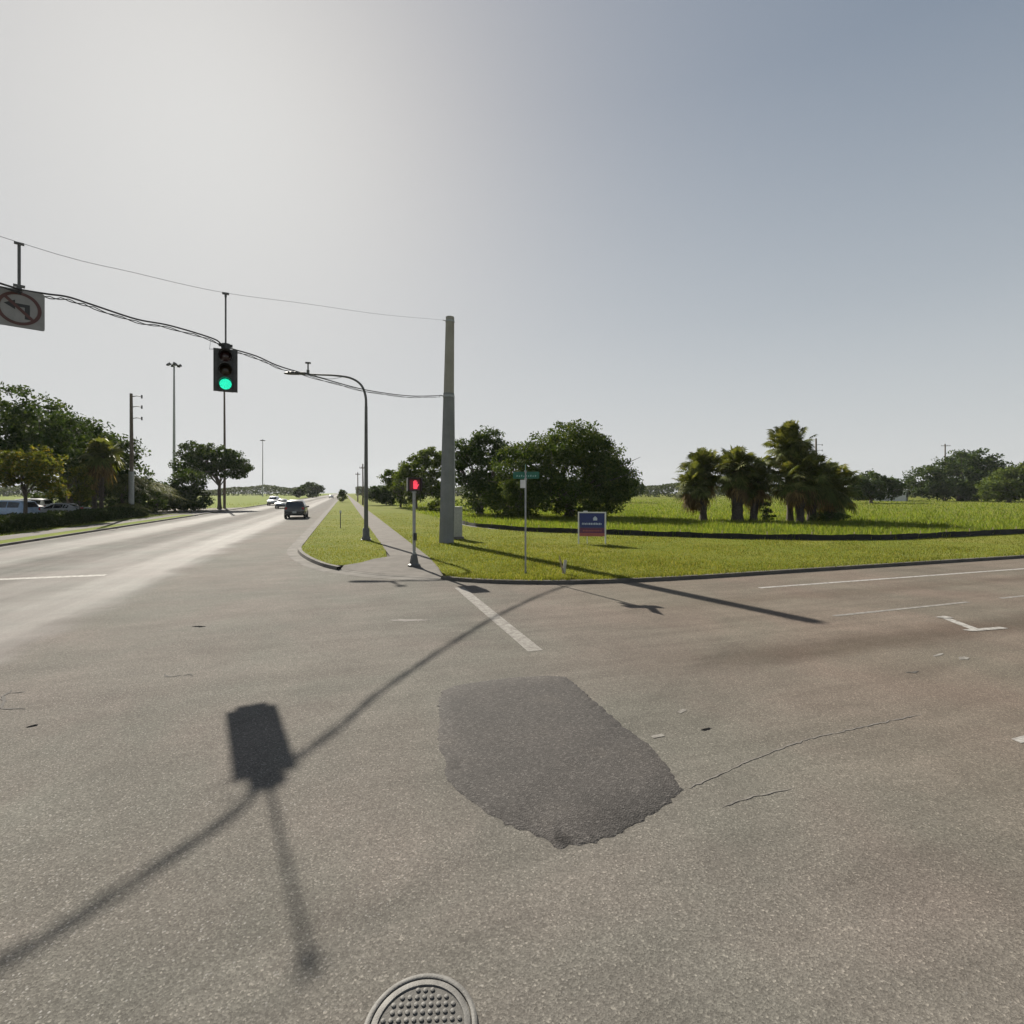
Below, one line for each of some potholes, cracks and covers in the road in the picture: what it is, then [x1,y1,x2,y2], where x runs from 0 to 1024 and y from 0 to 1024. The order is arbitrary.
manhole cover [364,973,477,1024]
crack [722,788,791,807]
